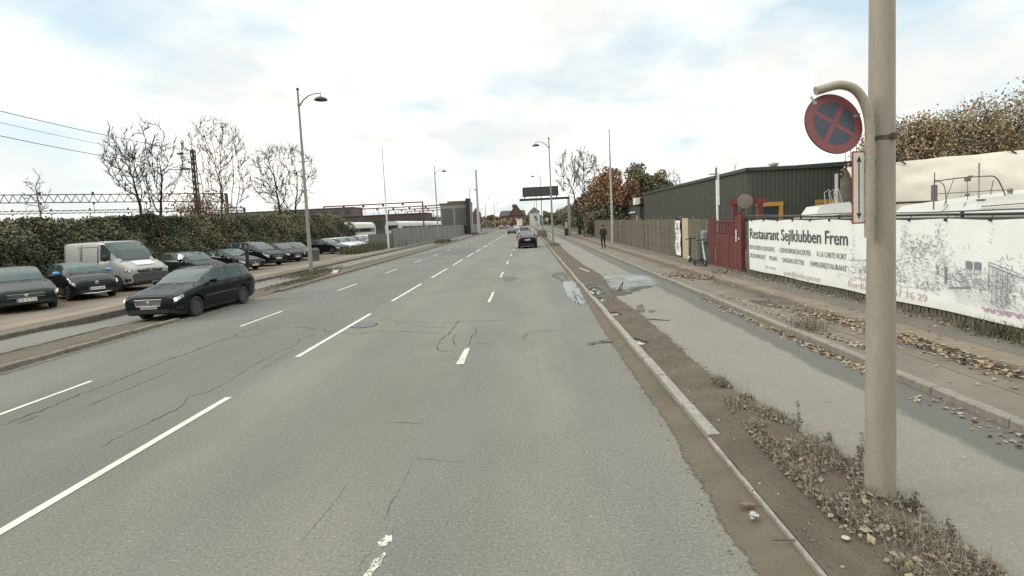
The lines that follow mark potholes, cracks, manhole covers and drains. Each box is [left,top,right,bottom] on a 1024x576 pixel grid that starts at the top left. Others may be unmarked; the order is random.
crack [9,320,498,445]
